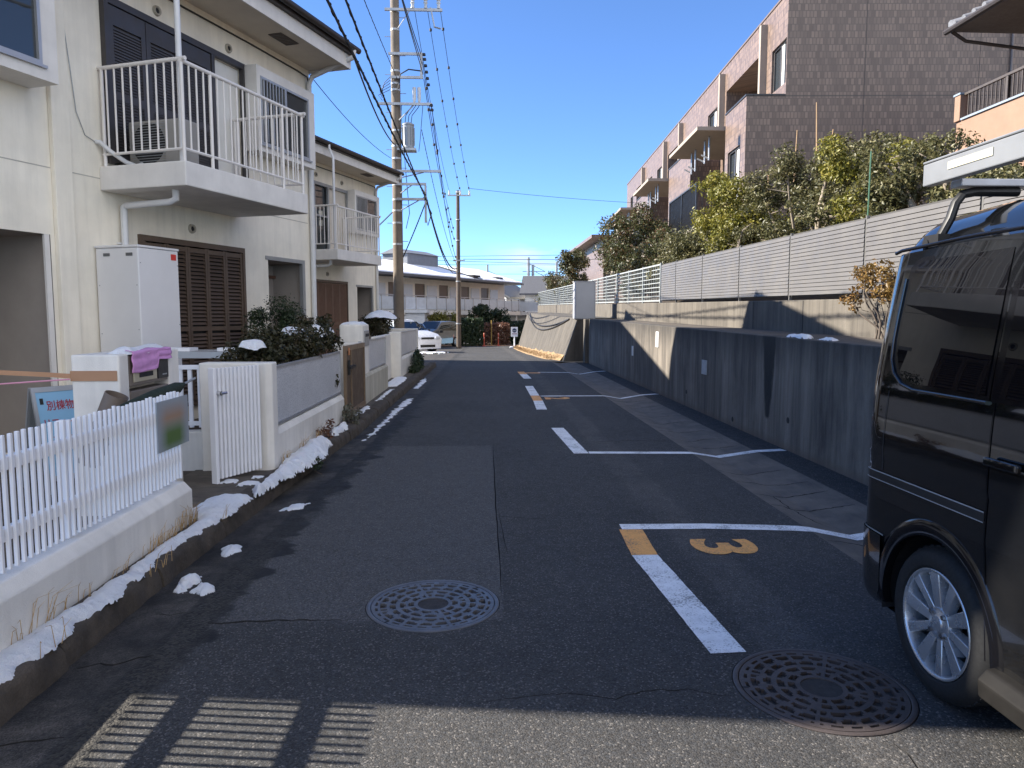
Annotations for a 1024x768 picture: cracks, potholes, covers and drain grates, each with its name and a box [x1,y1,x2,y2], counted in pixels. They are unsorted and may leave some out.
manhole cover [366,580,499,633]
crack [487,689,723,702]
manhole cover [732,649,919,737]
crack [78,656,150,669]
